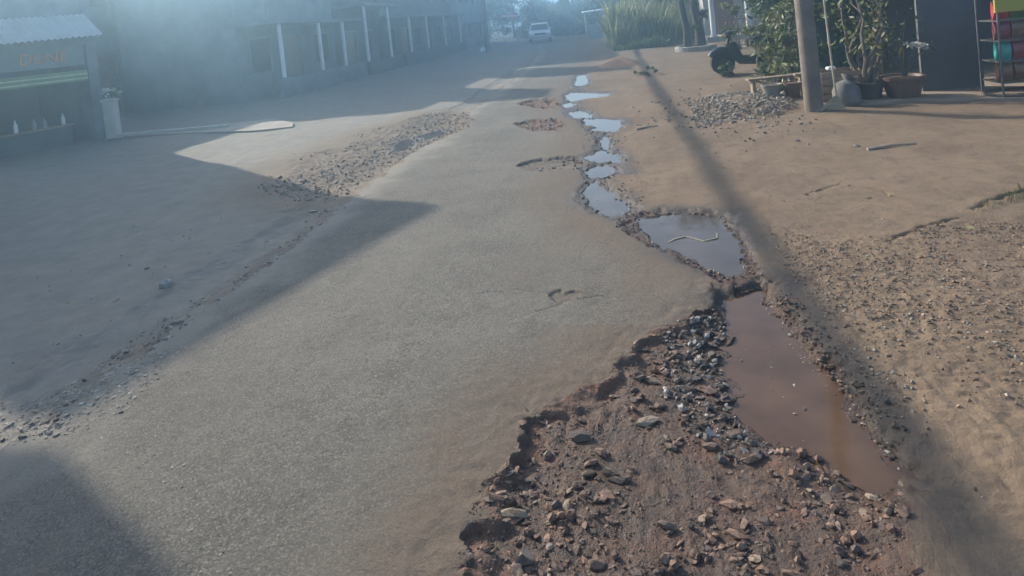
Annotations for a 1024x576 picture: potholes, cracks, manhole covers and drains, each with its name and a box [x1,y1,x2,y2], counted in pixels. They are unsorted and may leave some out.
pothole [514,118,567,132]
pothole [514,98,561,109]
pothole [454,278,921,576]
pothole [617,210,766,285]
pothole [518,155,586,172]
